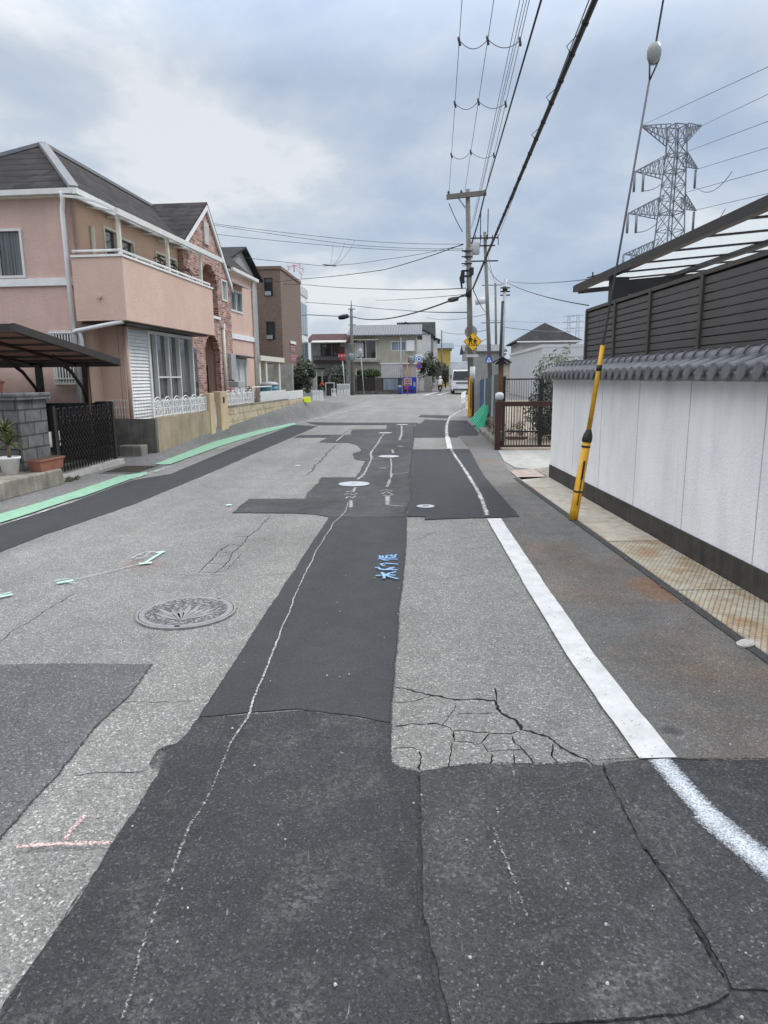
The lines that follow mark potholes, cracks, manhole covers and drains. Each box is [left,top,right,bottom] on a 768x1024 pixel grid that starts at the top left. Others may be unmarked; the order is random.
manhole cover [135,596,237,630]
crack [198,518,269,573]
crack [393,686,592,770]
pothole [149,744,175,771]
